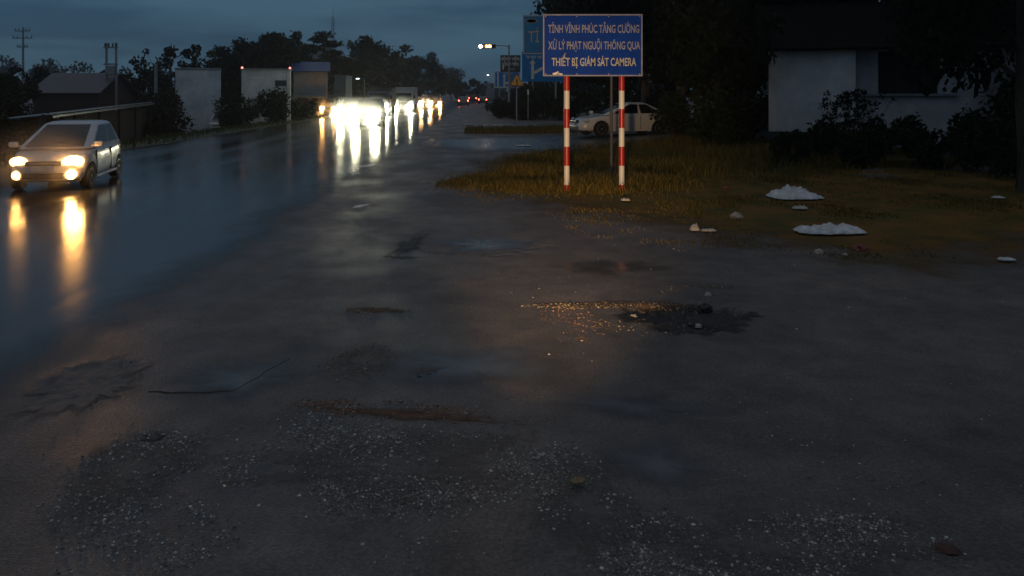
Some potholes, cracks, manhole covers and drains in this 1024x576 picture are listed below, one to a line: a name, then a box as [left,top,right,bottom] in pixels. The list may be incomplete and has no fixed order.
pothole [614,302,760,335]
crack [148,359,289,393]
pothole [388,235,425,256]
